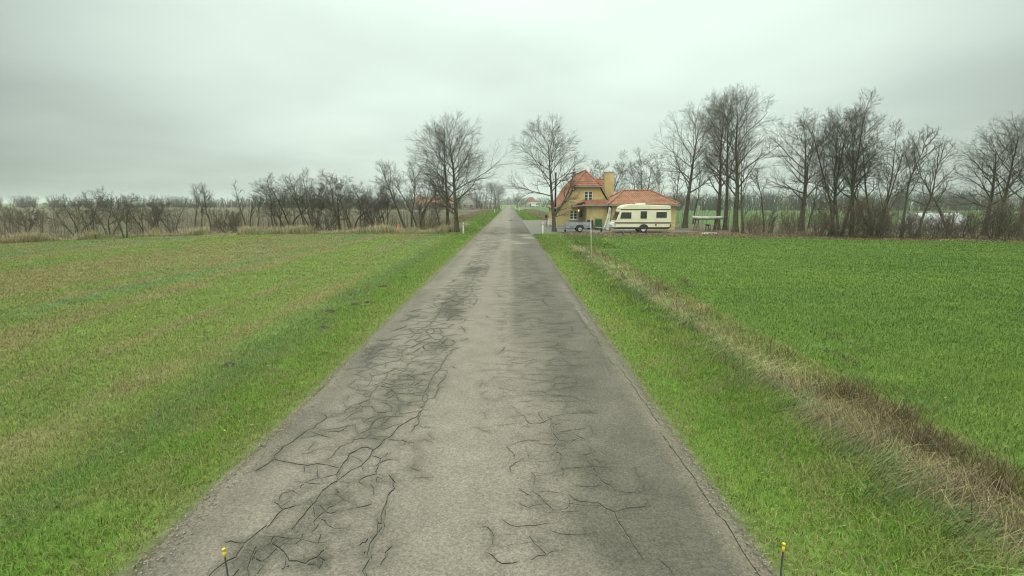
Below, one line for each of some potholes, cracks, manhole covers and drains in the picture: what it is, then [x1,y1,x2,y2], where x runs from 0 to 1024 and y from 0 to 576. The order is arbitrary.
crack [209,248,760,576]
